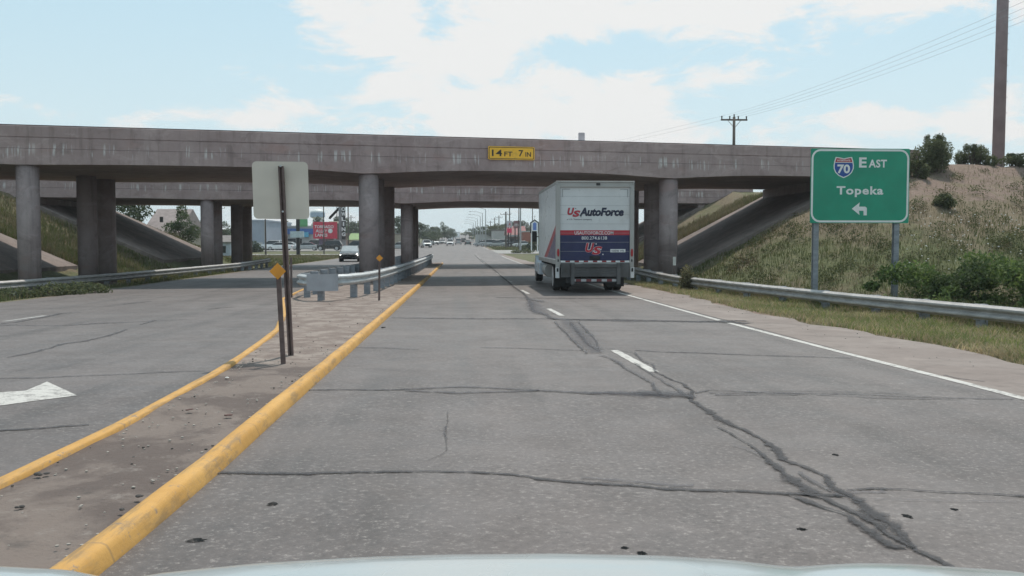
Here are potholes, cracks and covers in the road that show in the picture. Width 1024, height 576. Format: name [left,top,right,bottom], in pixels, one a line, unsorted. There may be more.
crack [11,320,155,357]
